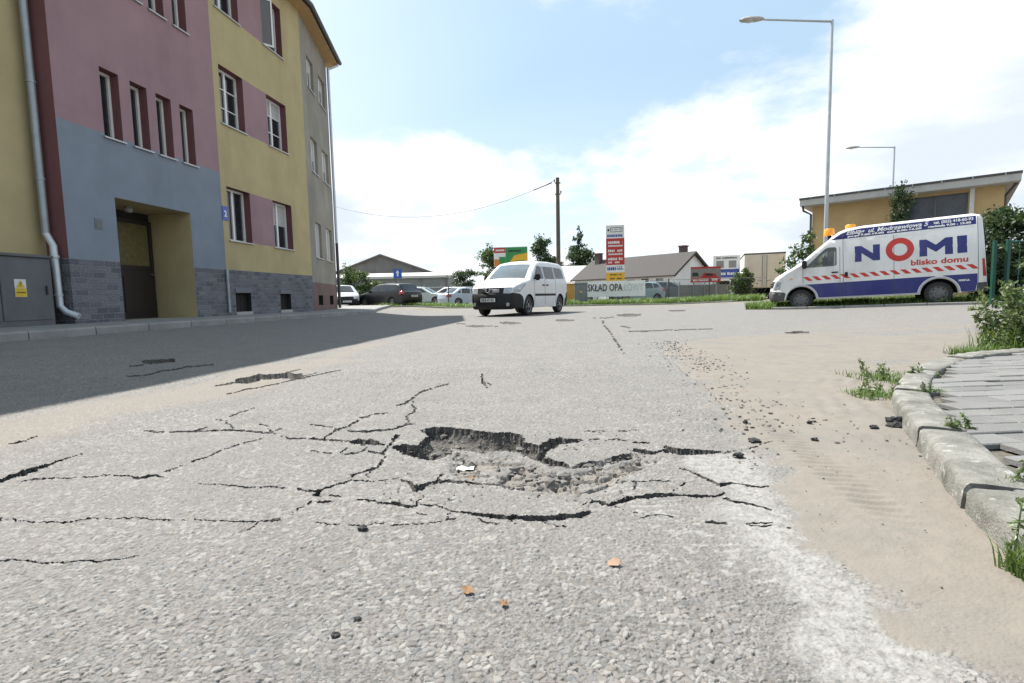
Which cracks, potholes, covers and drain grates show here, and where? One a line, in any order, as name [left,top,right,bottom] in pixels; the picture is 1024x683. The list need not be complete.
crack [0,435,83,483]
crack [0,555,139,564]
pothole [392,427,691,505]
pothole [214,369,317,387]
crack [126,364,341,395]
crack [21,383,791,532]
